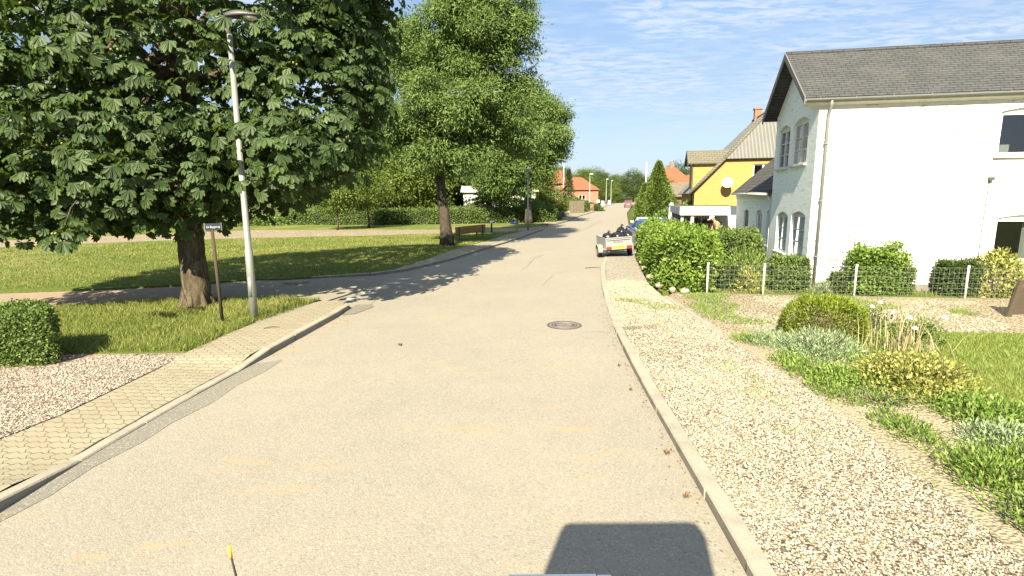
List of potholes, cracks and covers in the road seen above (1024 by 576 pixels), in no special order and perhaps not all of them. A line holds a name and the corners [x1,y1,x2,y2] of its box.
manhole cover [547,321,582,330]
